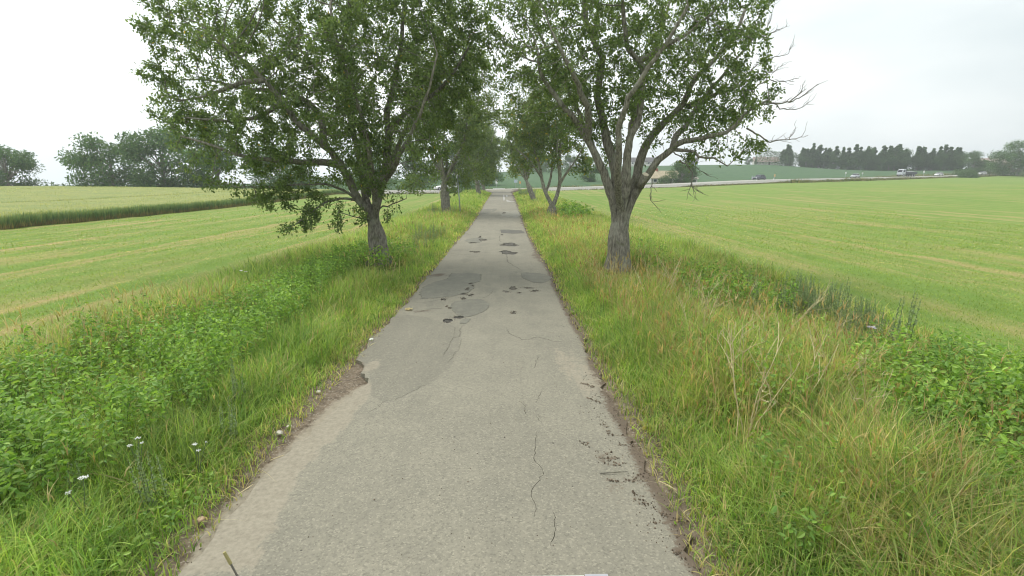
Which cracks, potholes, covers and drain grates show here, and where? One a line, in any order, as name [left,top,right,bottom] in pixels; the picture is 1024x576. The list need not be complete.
crack [524,393,556,546]
